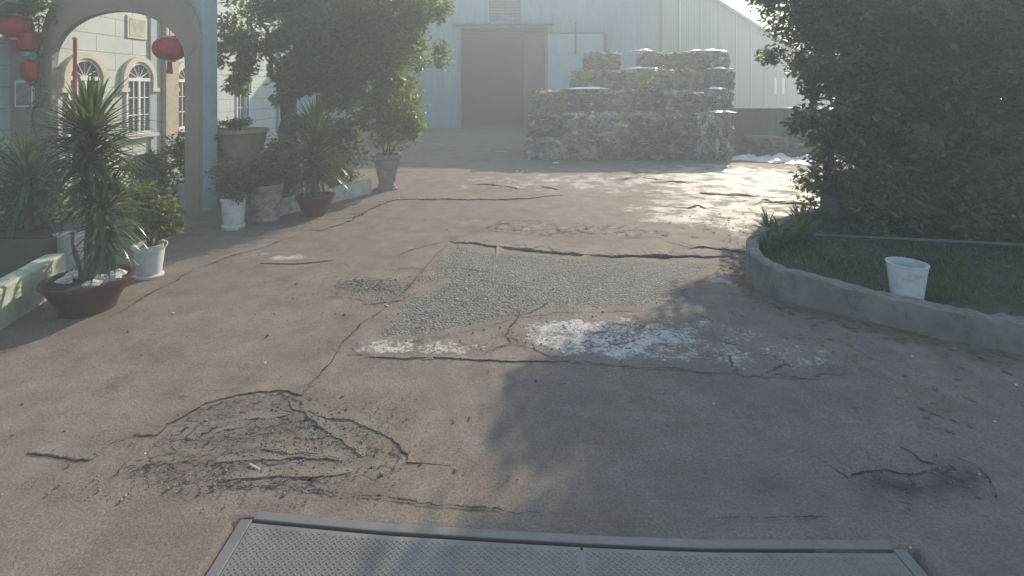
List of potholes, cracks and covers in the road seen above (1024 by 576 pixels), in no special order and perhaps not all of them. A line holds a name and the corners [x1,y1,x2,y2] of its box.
crack [27,181,573,514]
crack [664,238,746,252]
pothole [849,465,1001,509]
